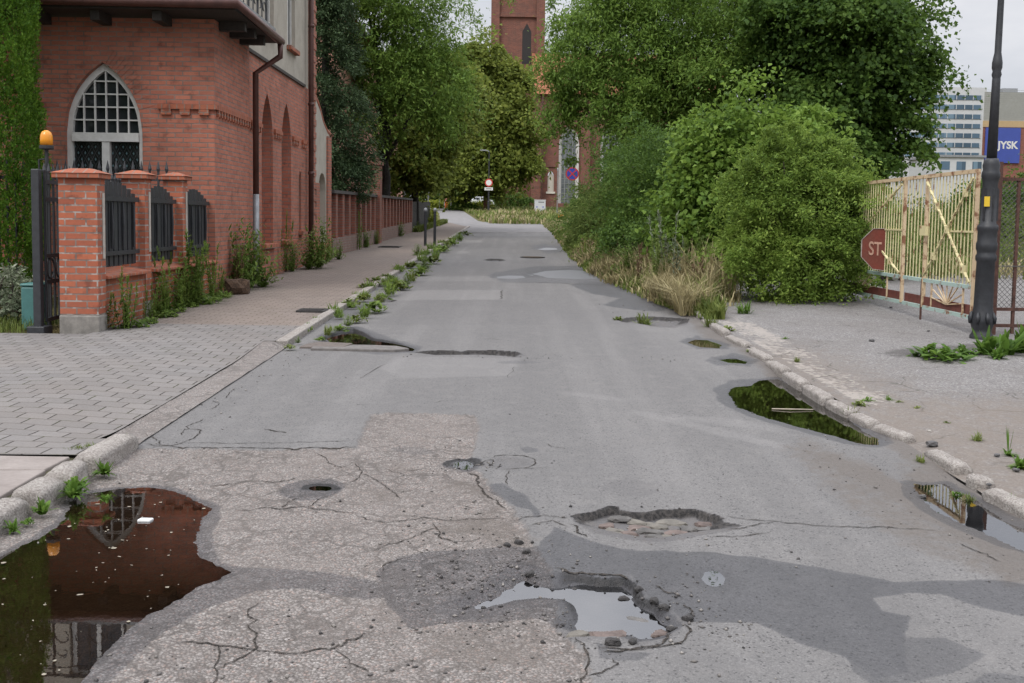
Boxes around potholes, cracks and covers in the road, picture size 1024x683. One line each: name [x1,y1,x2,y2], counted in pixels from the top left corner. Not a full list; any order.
pothole [441,457,484,472]
pothole [321,328,418,352]
crack [142,390,420,498]
pothole [569,505,742,542]
pothole [430,565,694,646]
crack [730,516,937,537]
pothole [618,316,690,328]
crack [171,604,371,683]
pothole [412,350,526,358]
crack [215,476,491,569]
